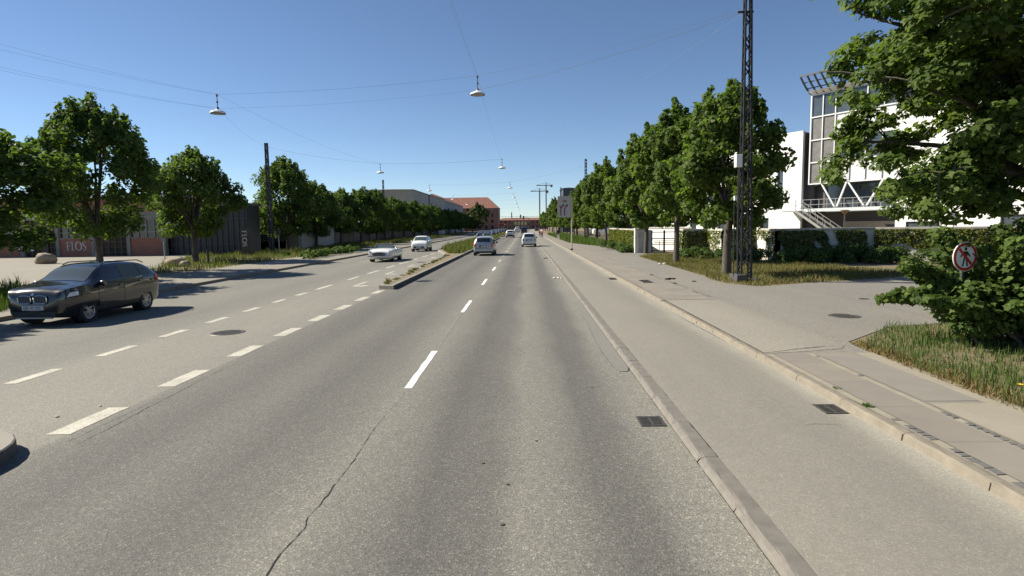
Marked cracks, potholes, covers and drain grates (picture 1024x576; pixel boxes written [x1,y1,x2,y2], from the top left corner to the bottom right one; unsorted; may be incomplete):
drain grate [812,404,849,414]
crack [266,404,396,576]
drain grate [636,416,666,427]
